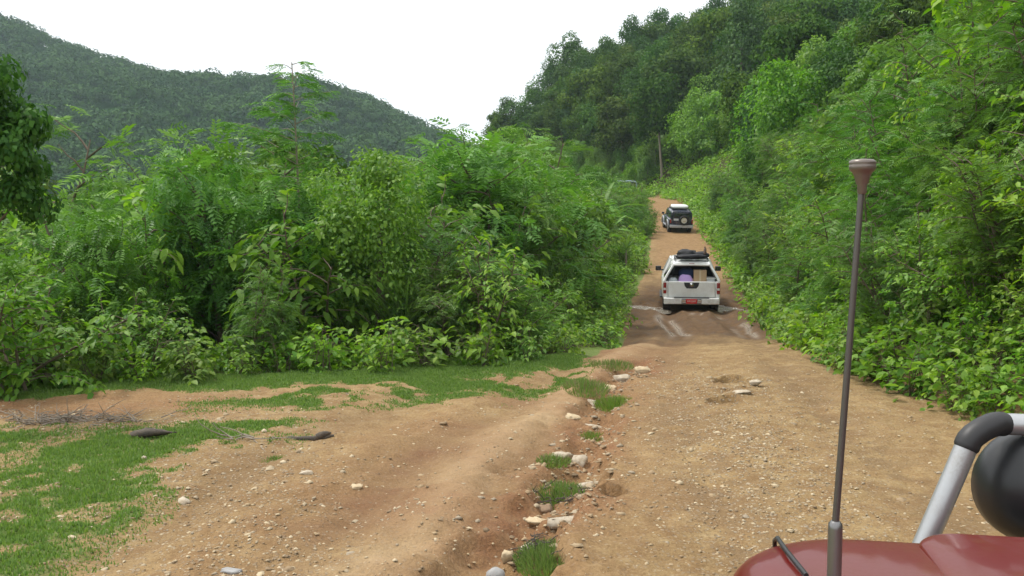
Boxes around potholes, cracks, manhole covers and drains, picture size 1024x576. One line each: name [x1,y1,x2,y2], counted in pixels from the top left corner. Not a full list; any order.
pothole [706,375,756,384]
pothole [600,484,628,497]
pothole [702,394,744,405]
